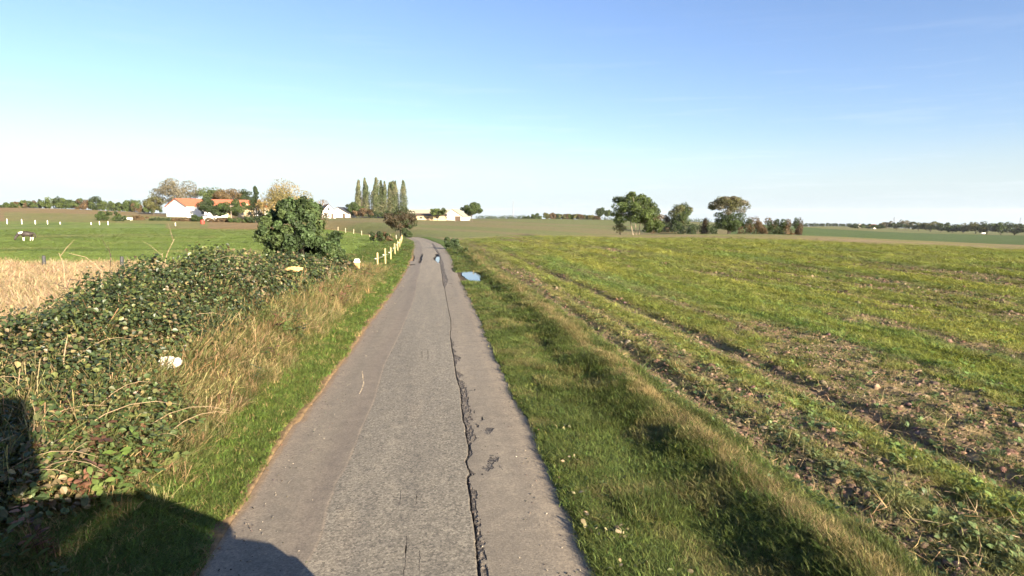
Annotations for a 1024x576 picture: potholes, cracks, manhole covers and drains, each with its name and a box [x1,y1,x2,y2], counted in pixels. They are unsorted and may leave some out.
crack [403,536,421,576]
crack [432,243,489,576]
pothole [482,455,503,472]
